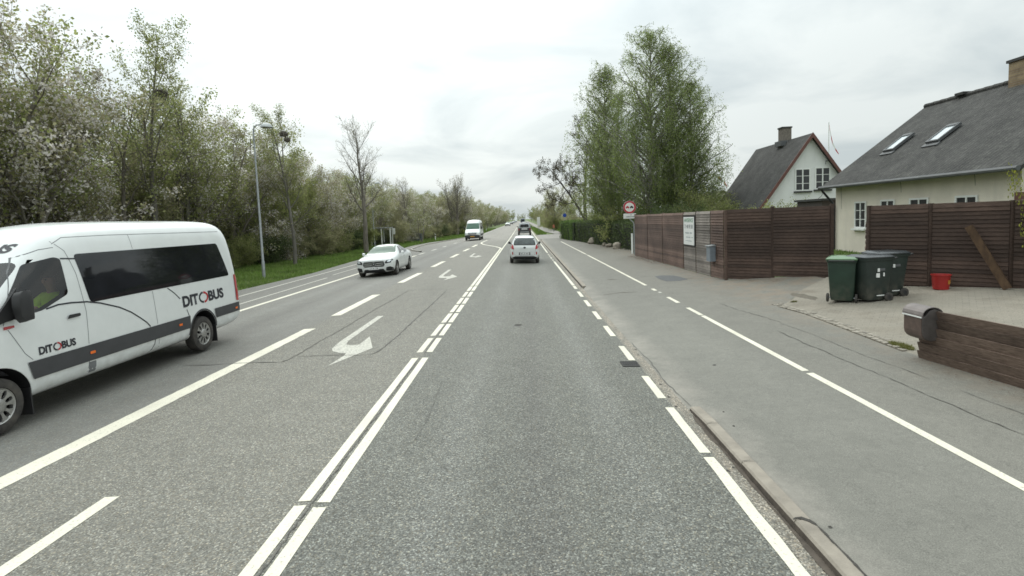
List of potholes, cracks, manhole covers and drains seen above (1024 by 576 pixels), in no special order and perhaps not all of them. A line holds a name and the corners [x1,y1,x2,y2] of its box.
crack [726,305,1024,434]
